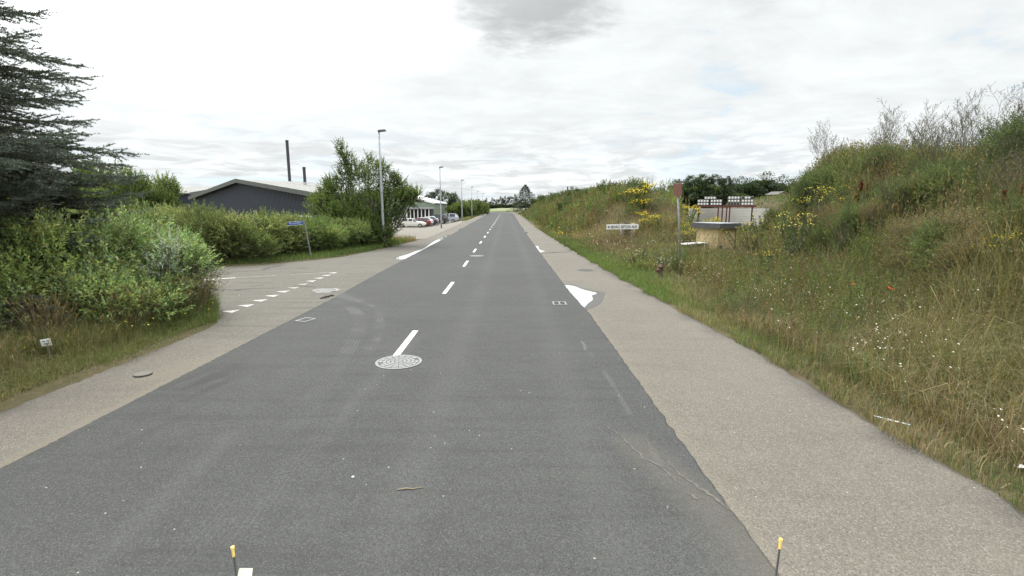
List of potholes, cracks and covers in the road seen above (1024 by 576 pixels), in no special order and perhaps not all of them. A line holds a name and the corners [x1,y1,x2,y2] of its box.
manhole cover [375,355,422,369]
crack [604,424,730,510]
